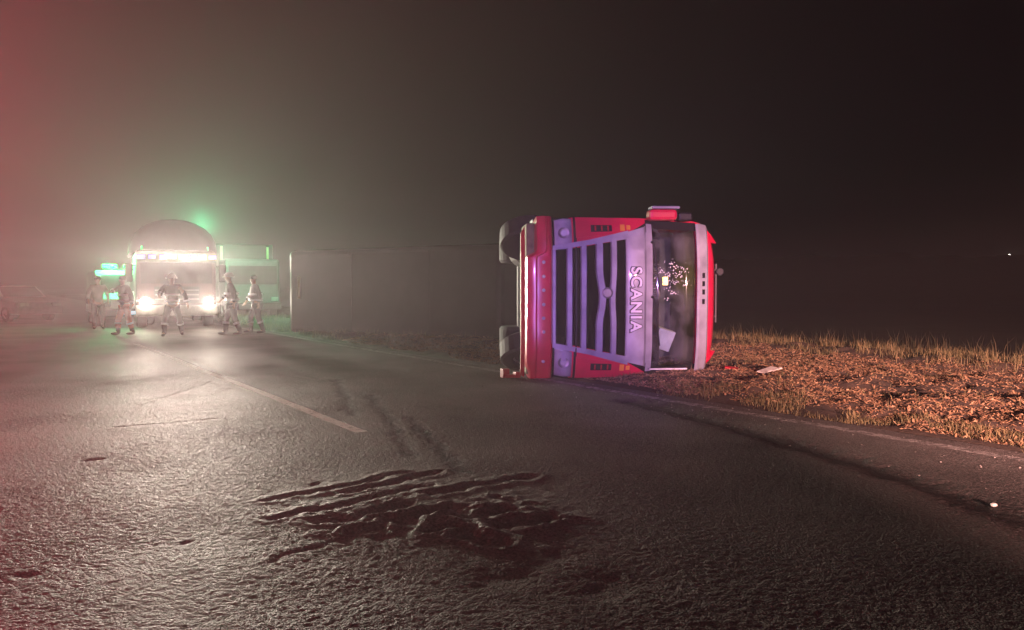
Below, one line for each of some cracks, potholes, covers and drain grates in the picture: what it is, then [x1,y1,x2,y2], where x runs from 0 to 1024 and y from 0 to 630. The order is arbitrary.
pothole [451,503,521,519]
pothole [485,512,563,530]
crack [110,381,221,428]
pothole [379,513,425,525]
pothole [352,499,421,518]
pothole [450,524,514,547]
pothole [392,503,480,526]
pothole [344,521,389,536]
pothole [418,518,461,534]
